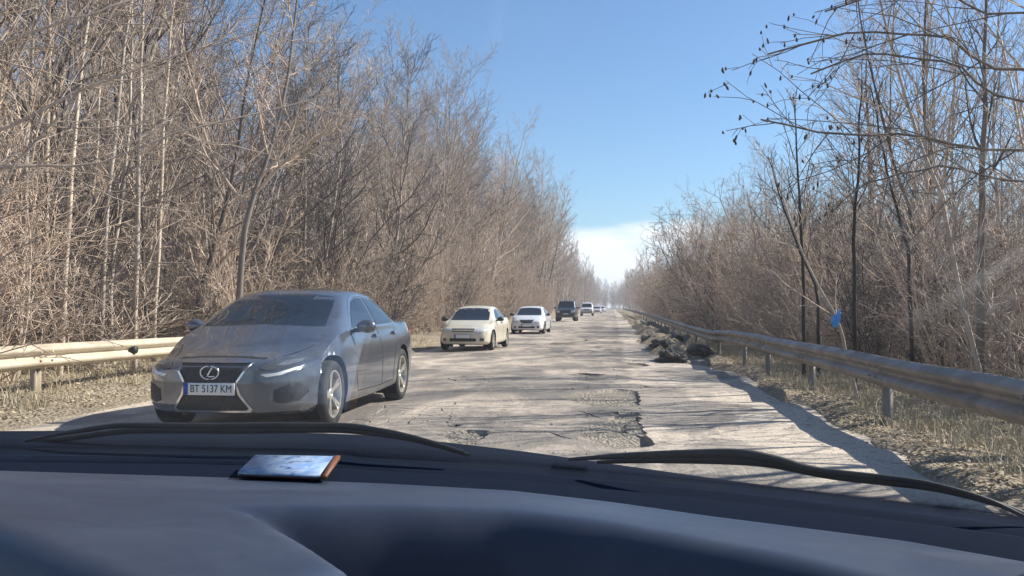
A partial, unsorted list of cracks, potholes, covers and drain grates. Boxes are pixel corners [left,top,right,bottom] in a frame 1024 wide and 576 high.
crack [348,402,471,425]
pothole [443,430,489,446]
crack [501,411,603,439]
pothole [560,389,641,406]
pothole [576,409,655,449]
